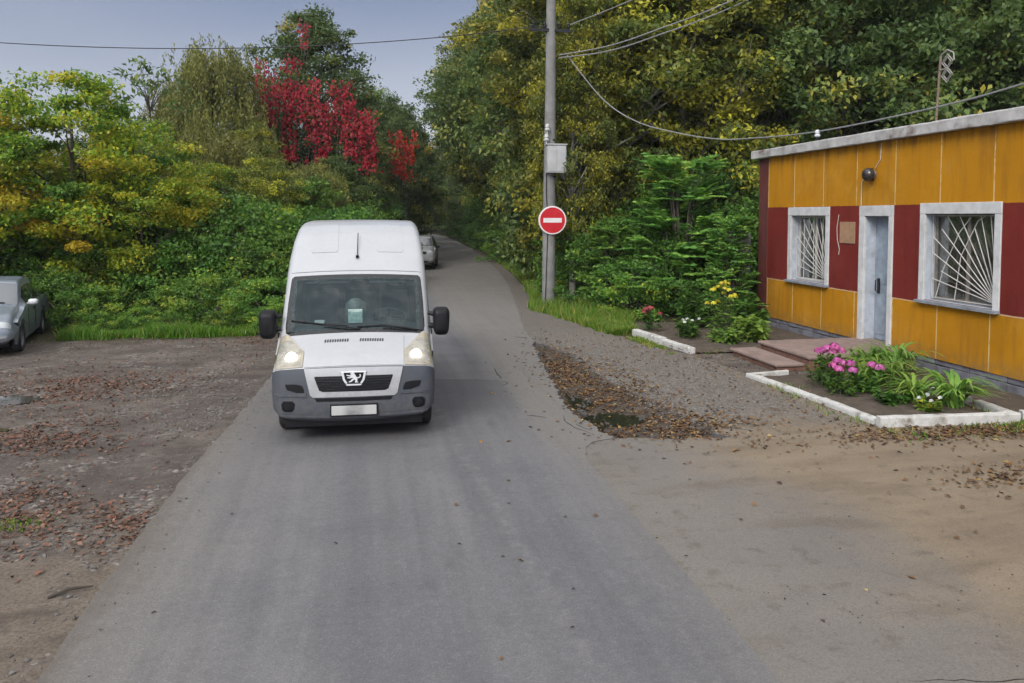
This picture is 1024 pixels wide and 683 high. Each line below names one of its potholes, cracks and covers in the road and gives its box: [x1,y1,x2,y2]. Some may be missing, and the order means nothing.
pothole [532,343,727,440]
